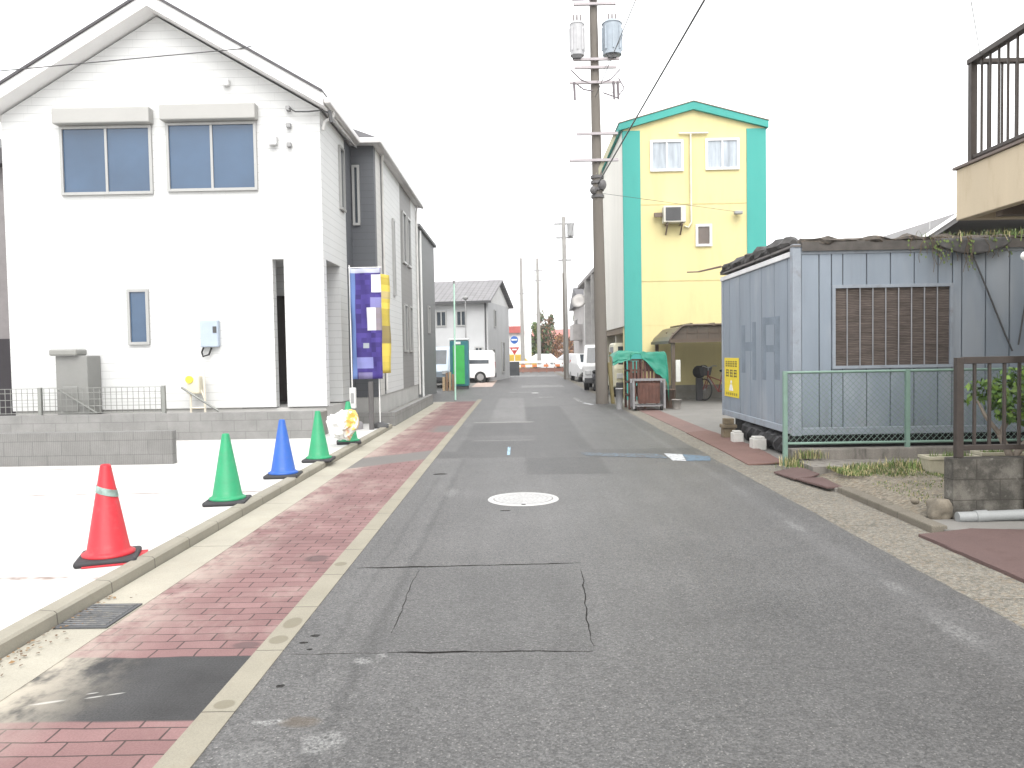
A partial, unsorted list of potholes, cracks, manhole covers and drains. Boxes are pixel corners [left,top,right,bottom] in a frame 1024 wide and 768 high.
manhole cover [488,492,559,506]
crack [366,563,594,654]
